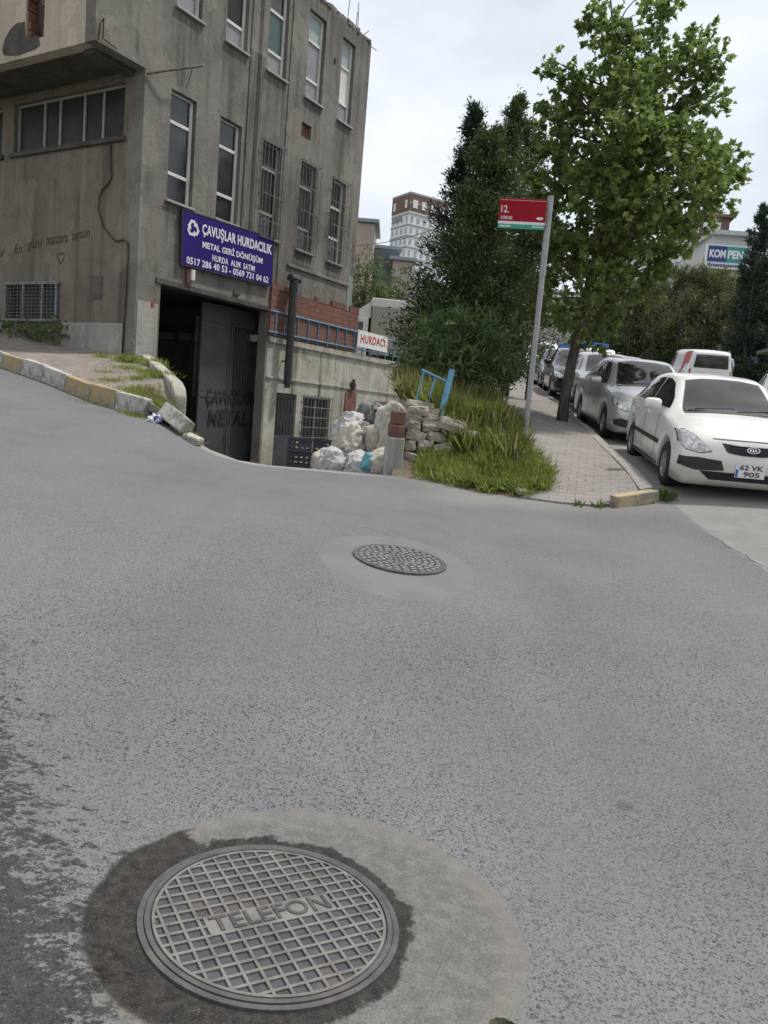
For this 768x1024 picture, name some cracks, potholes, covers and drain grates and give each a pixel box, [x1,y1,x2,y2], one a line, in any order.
manhole cover [136,845,399,1014]
manhole cover [353,544,447,576]
